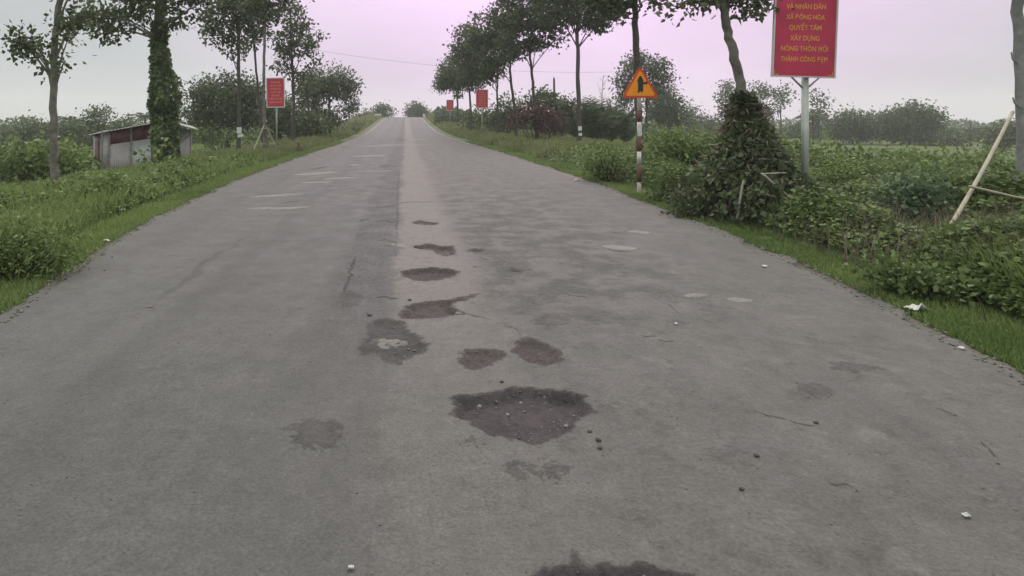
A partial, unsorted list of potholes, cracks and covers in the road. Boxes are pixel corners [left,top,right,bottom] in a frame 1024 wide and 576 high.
pothole [443,384,600,449]
crack [342,254,400,299]
pothole [394,266,467,283]
pothole [451,345,513,375]
pothole [505,335,572,370]
pothole [350,316,437,369]
pothole [521,546,702,576]
pothole [408,243,461,258]
pothole [393,292,486,322]
